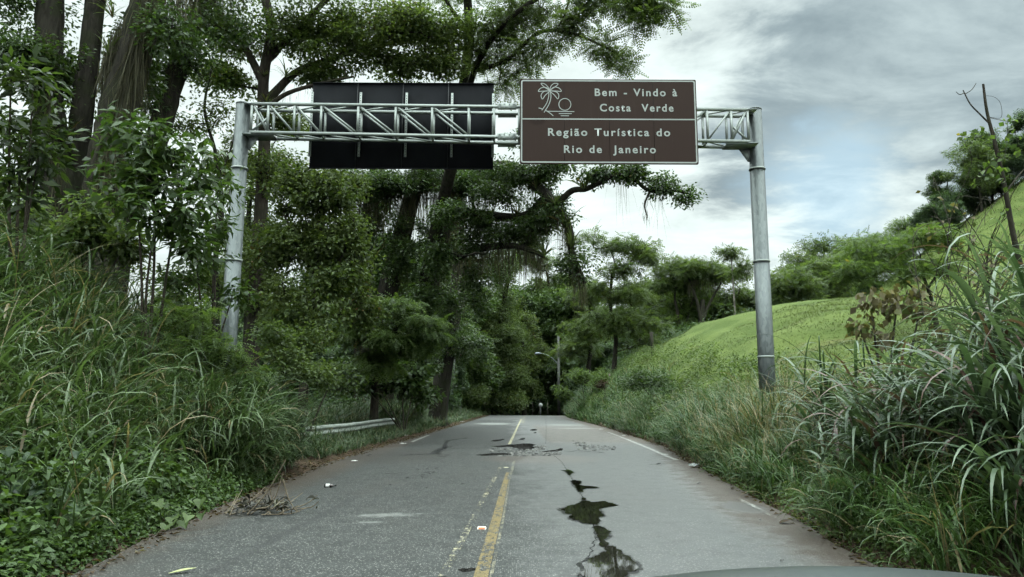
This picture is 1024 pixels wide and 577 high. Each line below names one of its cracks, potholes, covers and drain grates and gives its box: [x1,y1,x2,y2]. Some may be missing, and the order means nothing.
pothole [492,443,535,451]
crack [519,438,615,561]
